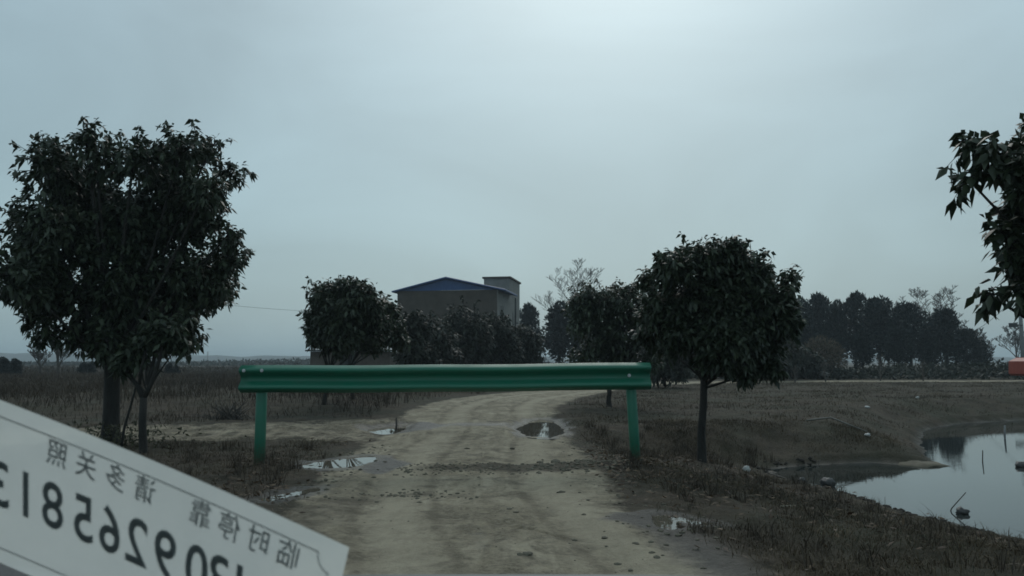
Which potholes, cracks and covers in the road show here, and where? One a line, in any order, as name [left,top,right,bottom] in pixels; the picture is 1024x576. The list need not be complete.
pothole [512,416,570,440]
pothole [639,511,718,532]
pothole [362,422,413,435]
pothole [295,455,385,469]
pothole [246,486,331,502]
